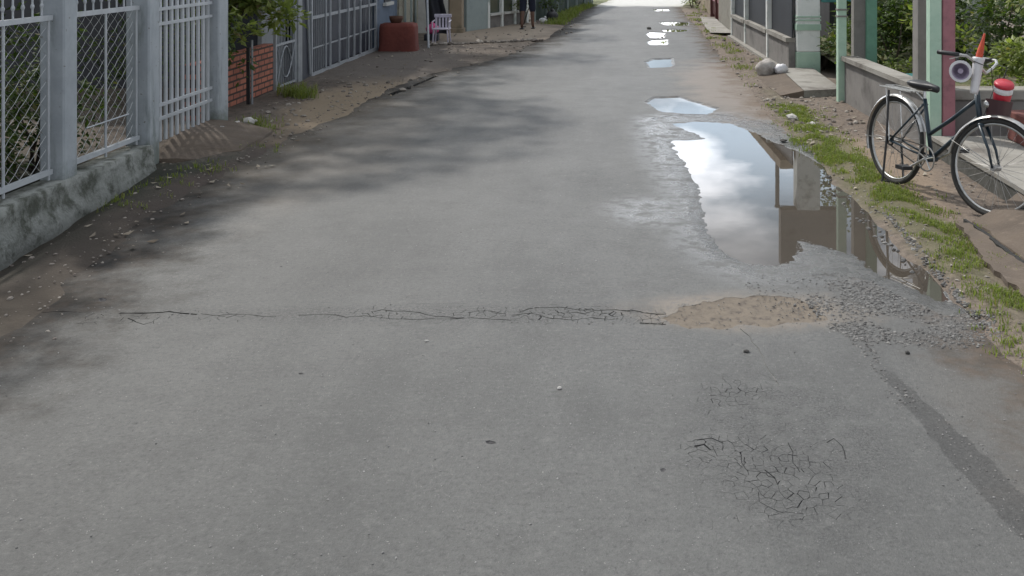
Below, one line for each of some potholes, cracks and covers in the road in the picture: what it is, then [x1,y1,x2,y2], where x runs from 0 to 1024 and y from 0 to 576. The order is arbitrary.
pothole [644,96,719,114]
pothole [662,295,828,329]
crack [678,372,882,530]
crack [41,303,666,326]
pothole [644,58,675,68]
pothole [651,114,970,315]
crack [741,329,780,386]
